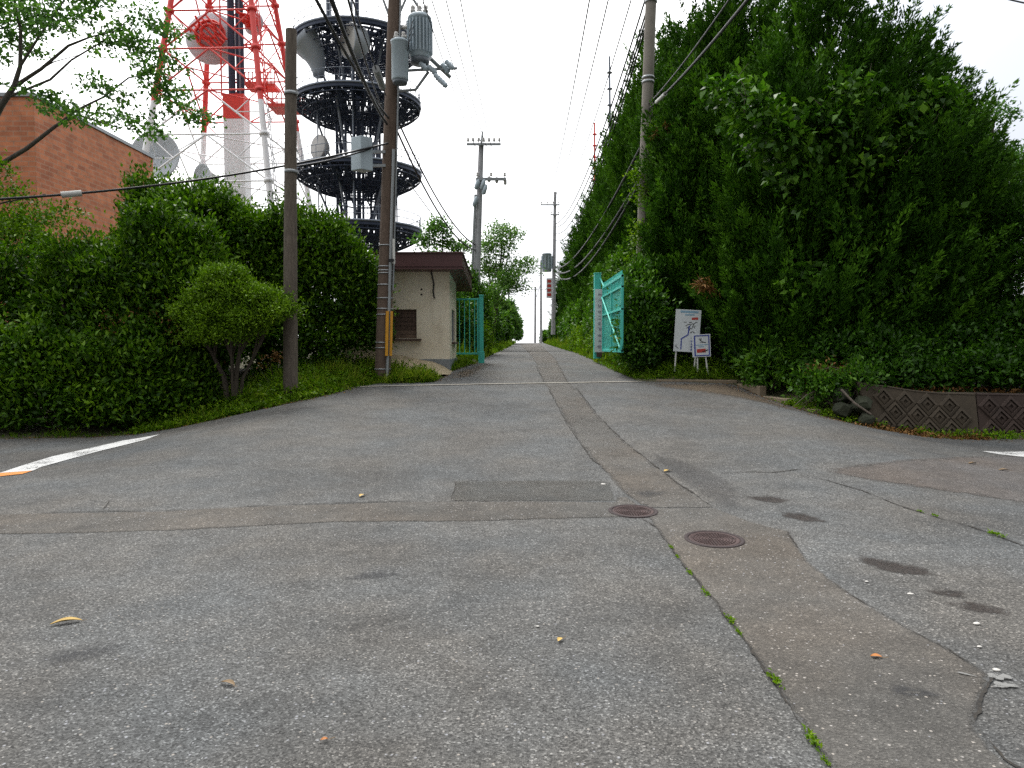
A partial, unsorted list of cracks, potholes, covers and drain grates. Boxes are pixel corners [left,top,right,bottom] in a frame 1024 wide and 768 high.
manhole cover [608,504,658,518]
crack [836,584,1021,768]
crack [642,518,832,768]
manhole cover [684,530,745,548]
